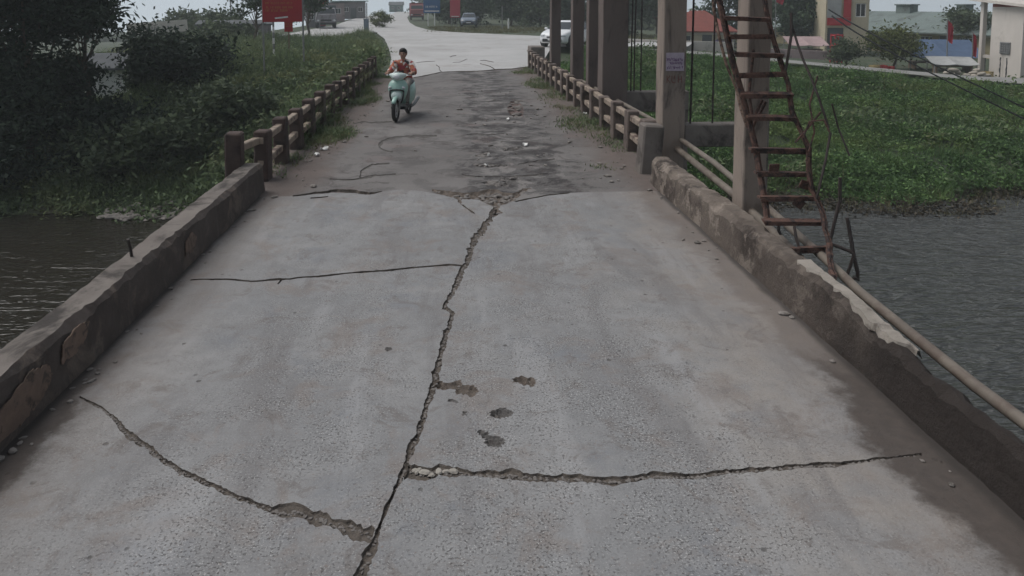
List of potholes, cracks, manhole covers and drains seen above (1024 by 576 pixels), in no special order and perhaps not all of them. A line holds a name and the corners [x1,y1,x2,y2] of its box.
crack [80,205,921,576]
pothole [434,379,479,397]
pothole [489,407,514,419]
crack [515,192,570,202]
pothole [477,430,505,447]
crack [293,121,437,199]
pothole [512,375,536,387]
